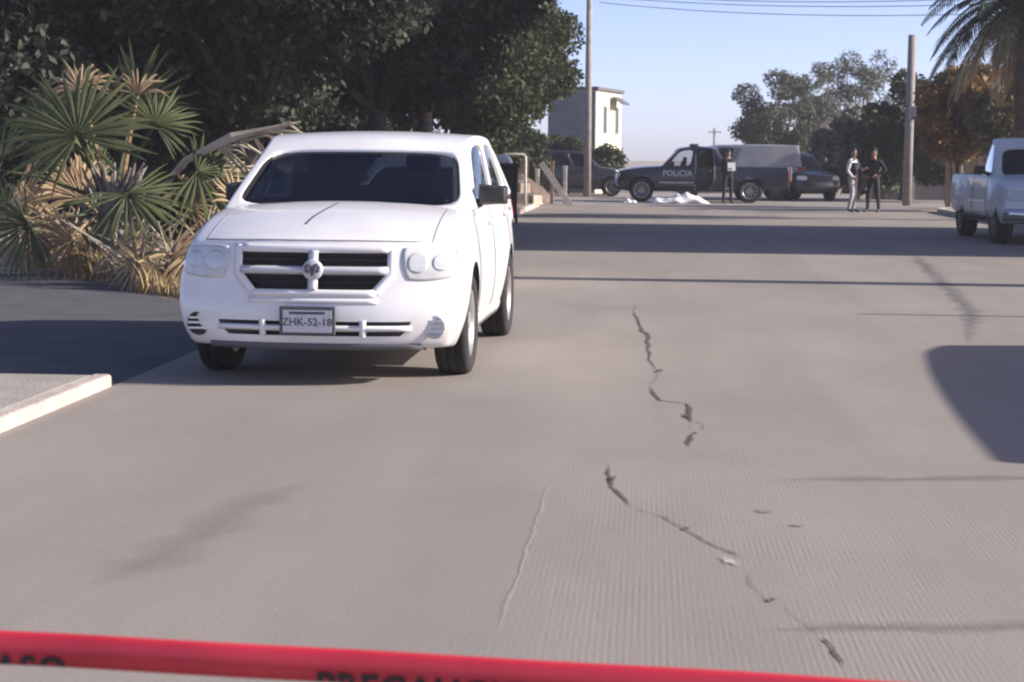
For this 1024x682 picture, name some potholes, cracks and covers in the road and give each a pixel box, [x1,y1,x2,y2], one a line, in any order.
crack [634,313,654,366]
crack [823,638,844,663]
crack [651,389,703,445]
crack [658,515,736,554]
crack [606,468,629,504]
